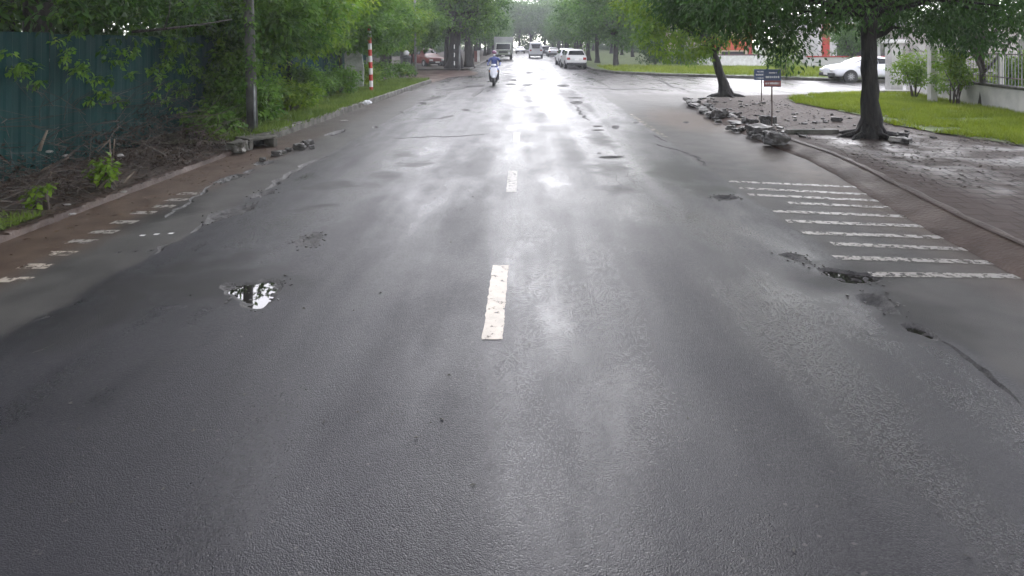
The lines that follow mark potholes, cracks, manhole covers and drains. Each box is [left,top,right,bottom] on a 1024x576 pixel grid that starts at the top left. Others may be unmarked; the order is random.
crack [261,156,328,192]
crack [651,134,707,166]
crack [938,339,1024,407]
crack [161,183,215,220]
pothole [218,274,292,312]
pothole [899,323,943,341]
crack [399,115,489,139]
pothole [288,231,327,251]
pothole [770,251,816,265]
pothole [845,289,909,317]
pothole [808,264,895,286]
